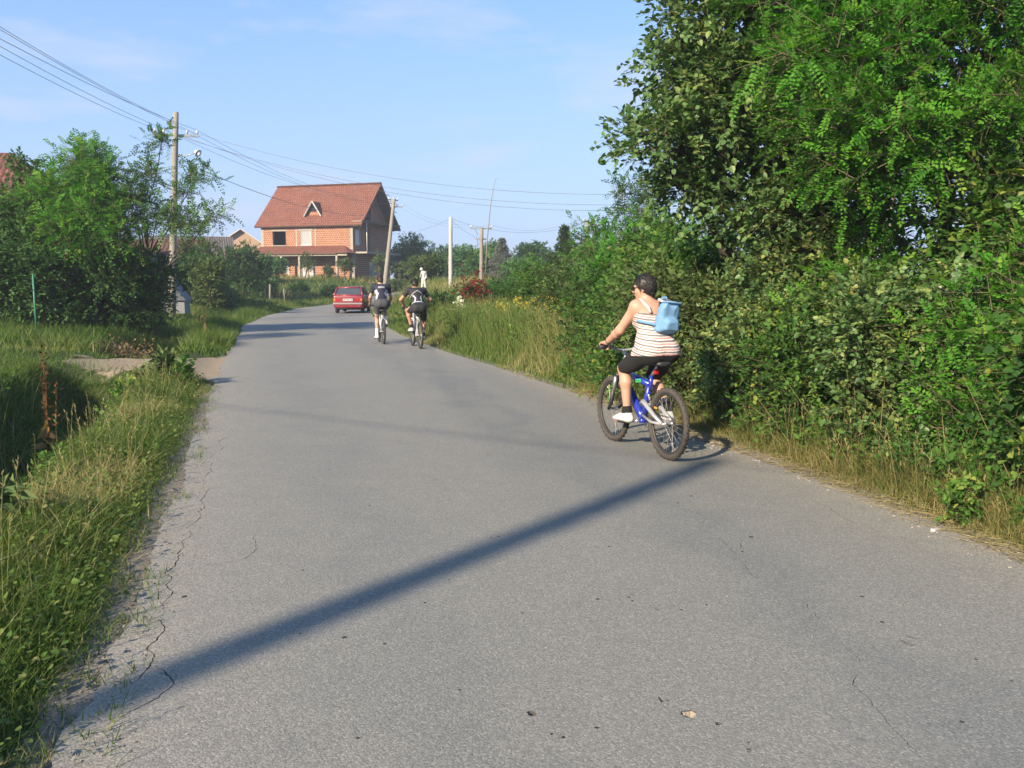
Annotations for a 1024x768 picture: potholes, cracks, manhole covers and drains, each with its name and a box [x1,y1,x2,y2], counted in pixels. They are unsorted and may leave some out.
crack [719,538,917,766]
crack [103,439,223,728]
